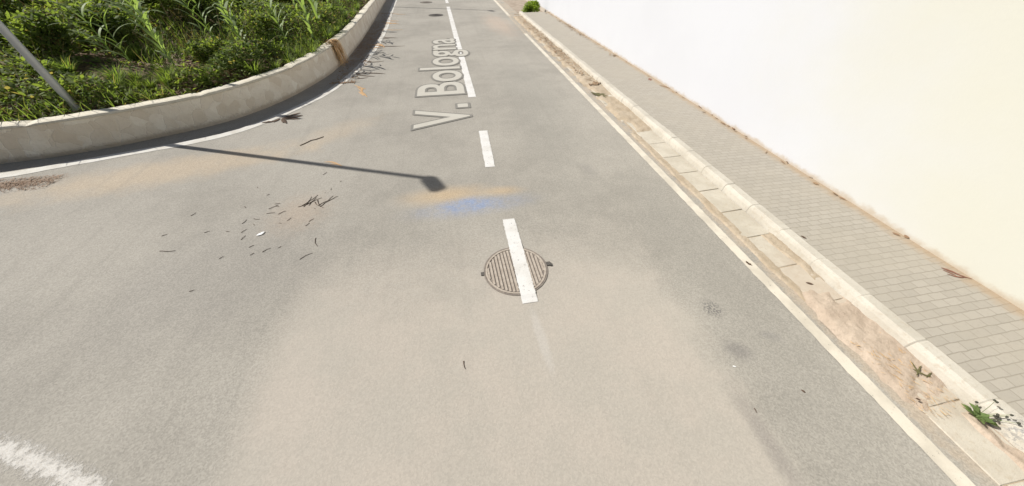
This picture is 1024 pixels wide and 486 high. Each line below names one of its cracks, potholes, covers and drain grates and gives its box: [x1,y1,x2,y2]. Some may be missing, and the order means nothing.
manhole cover [481,248,552,296]
